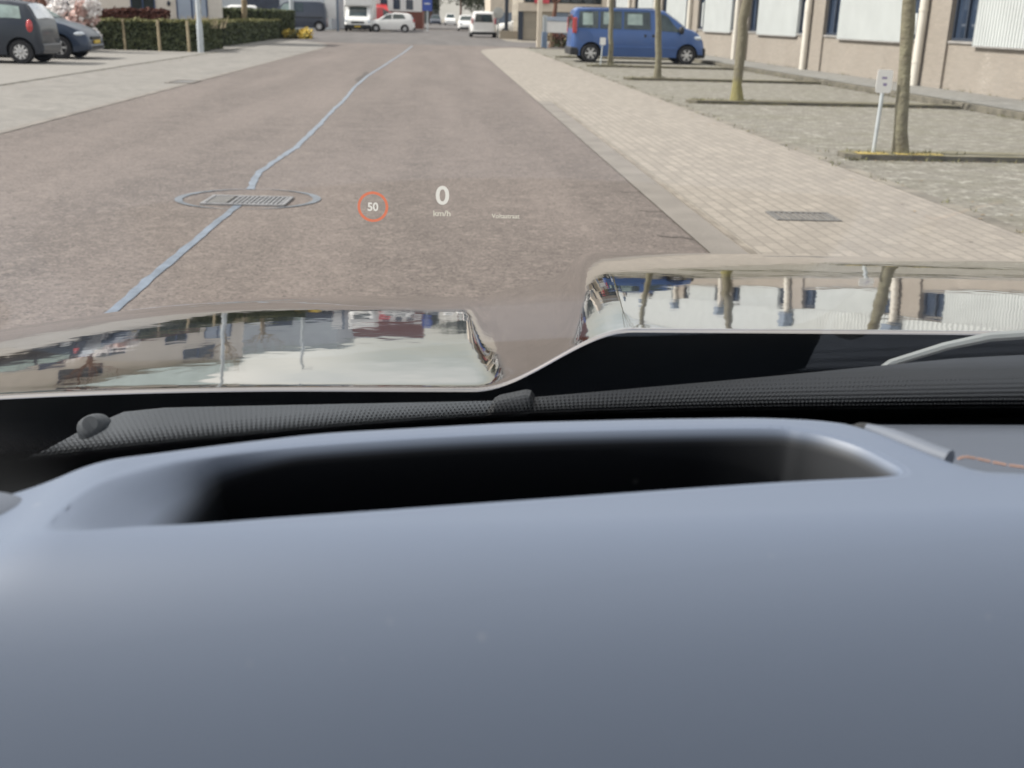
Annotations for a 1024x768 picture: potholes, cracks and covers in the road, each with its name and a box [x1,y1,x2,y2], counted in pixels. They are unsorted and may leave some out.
drain grate [765,211,842,222]
